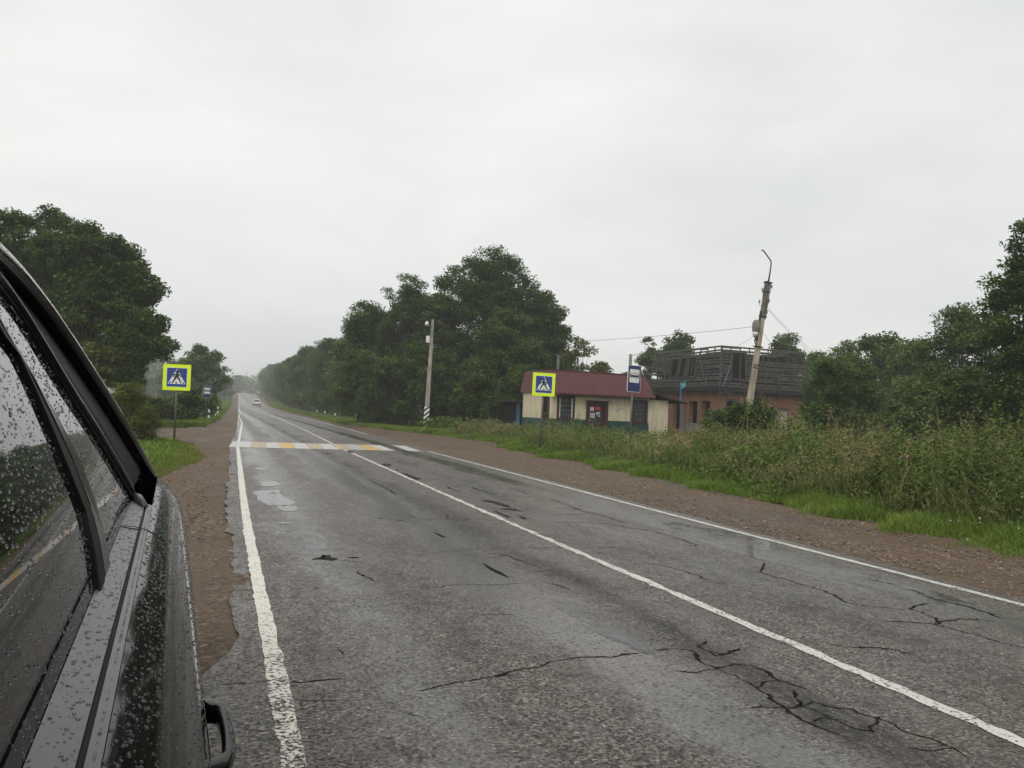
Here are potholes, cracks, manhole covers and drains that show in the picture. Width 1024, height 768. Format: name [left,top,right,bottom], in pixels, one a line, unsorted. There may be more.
crack [412,476,1023,648]
crack [406,641,968,758]
